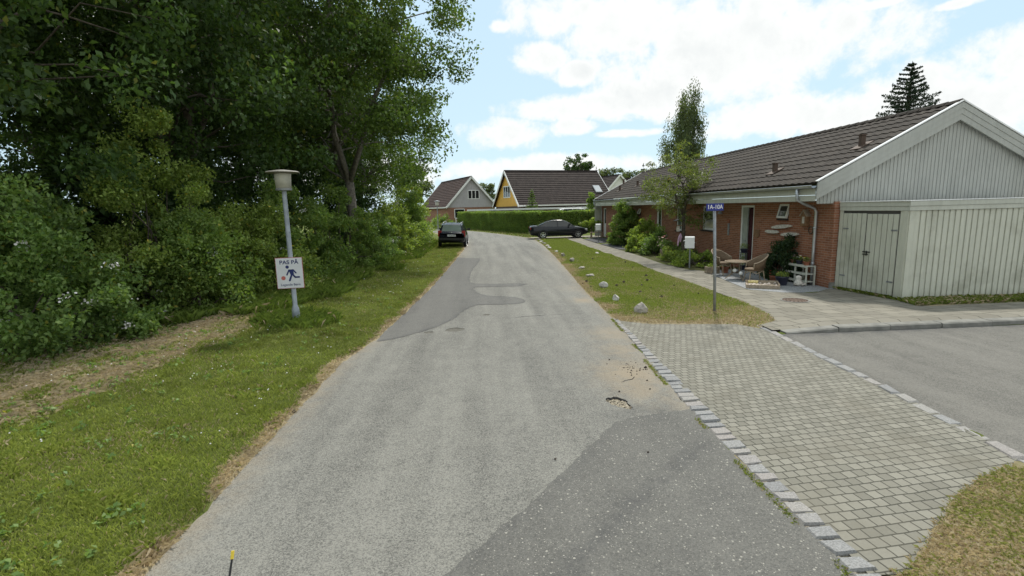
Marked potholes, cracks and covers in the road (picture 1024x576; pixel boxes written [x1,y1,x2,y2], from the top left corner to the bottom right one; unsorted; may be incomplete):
pothole [606,397,632,409]
